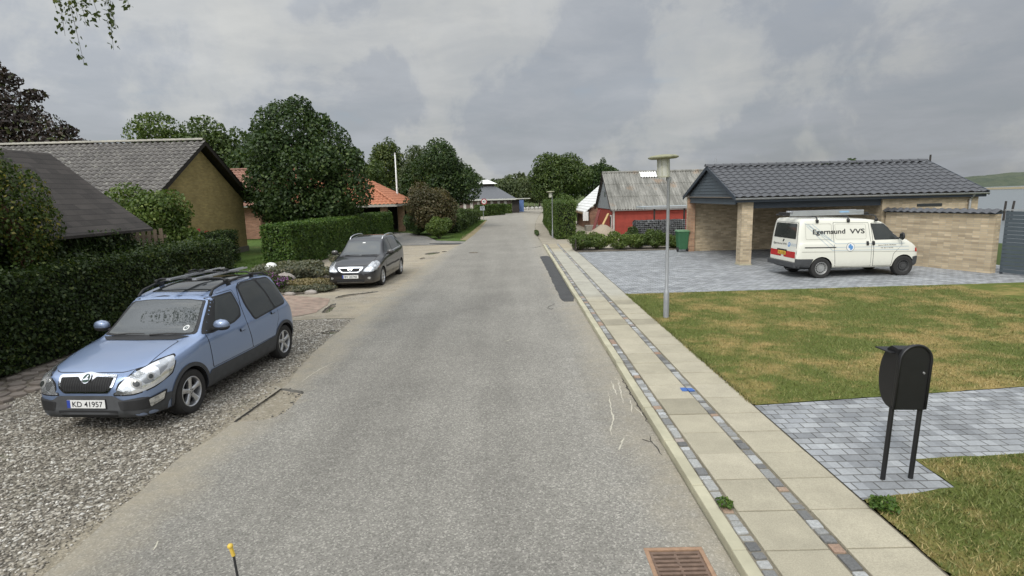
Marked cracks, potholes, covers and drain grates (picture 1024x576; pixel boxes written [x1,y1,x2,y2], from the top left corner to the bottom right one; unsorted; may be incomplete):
drain grate [643,547,717,576]
crack [608,378,662,455]
